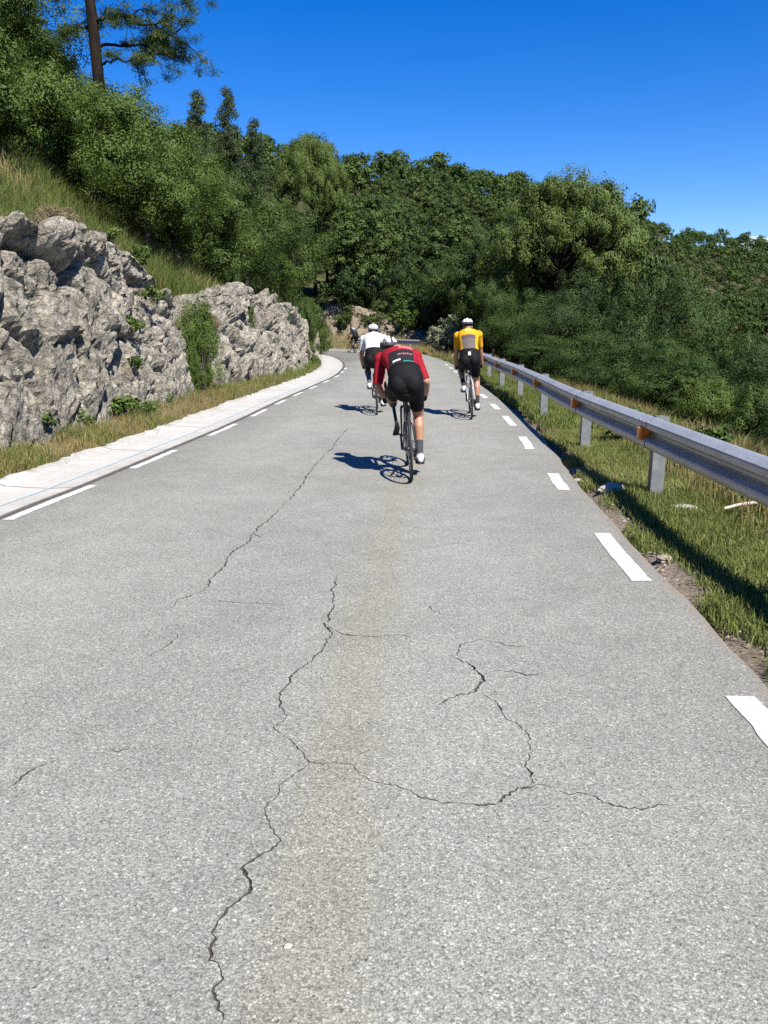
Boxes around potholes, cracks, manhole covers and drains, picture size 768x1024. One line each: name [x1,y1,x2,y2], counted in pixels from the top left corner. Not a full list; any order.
crack [207,577,669,1024]
crack [3,744,160,791]
crack [172,430,347,607]
